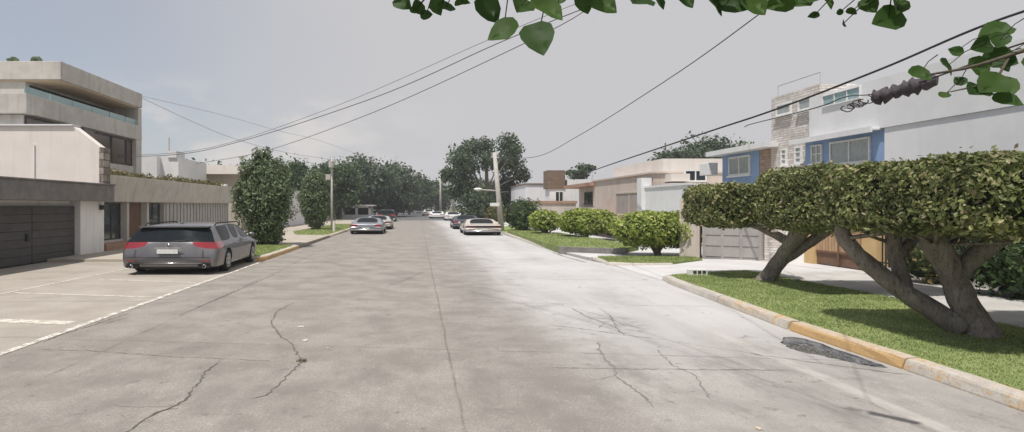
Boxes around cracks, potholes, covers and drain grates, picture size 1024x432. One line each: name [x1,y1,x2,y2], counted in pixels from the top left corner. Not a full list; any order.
crack [37,304,307,432]
crack [553,307,909,405]
